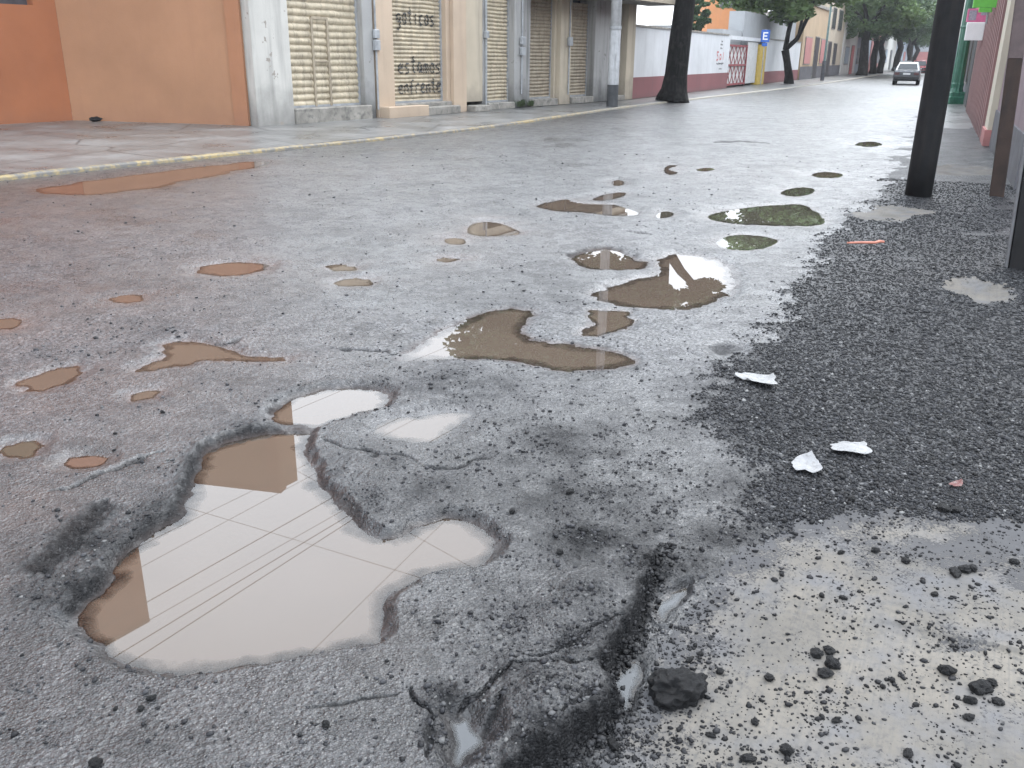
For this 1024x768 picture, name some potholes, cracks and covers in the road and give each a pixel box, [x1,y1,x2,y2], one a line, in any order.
pothole [122,333,298,374]
crack [322,435,496,470]
pothole [384,302,649,374]
pothole [261,379,401,428]
pothole [58,422,512,677]
pothole [575,249,750,311]
crack [462,611,626,712]
crack [305,689,437,757]
pothole [45,445,123,473]
pothole [347,398,497,452]
pothole [430,693,508,768]
